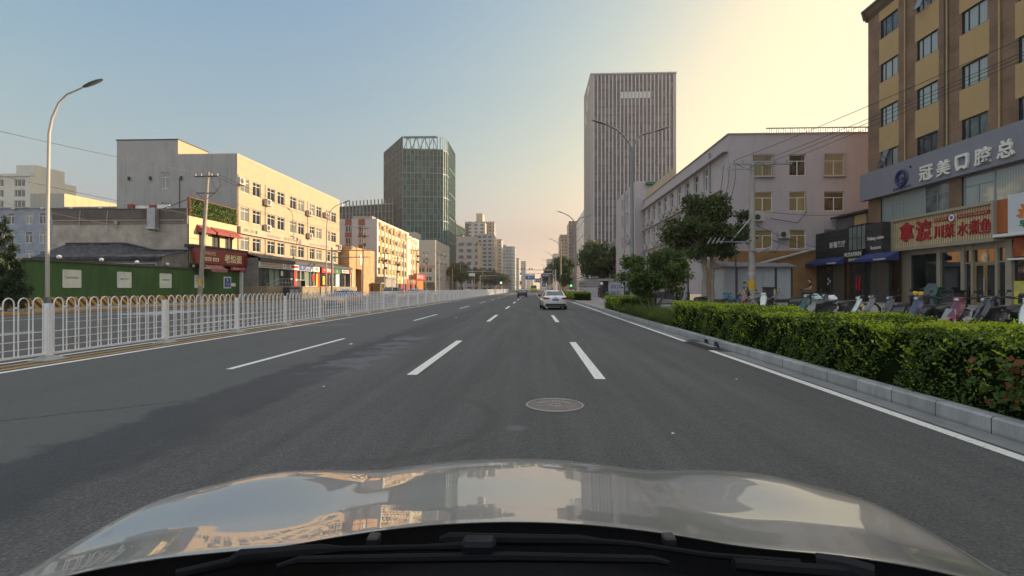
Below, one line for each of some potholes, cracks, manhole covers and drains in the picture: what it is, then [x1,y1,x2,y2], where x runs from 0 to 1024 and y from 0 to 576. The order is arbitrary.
drain grate [683,335,725,350]
manhole cover [525,398,585,412]
